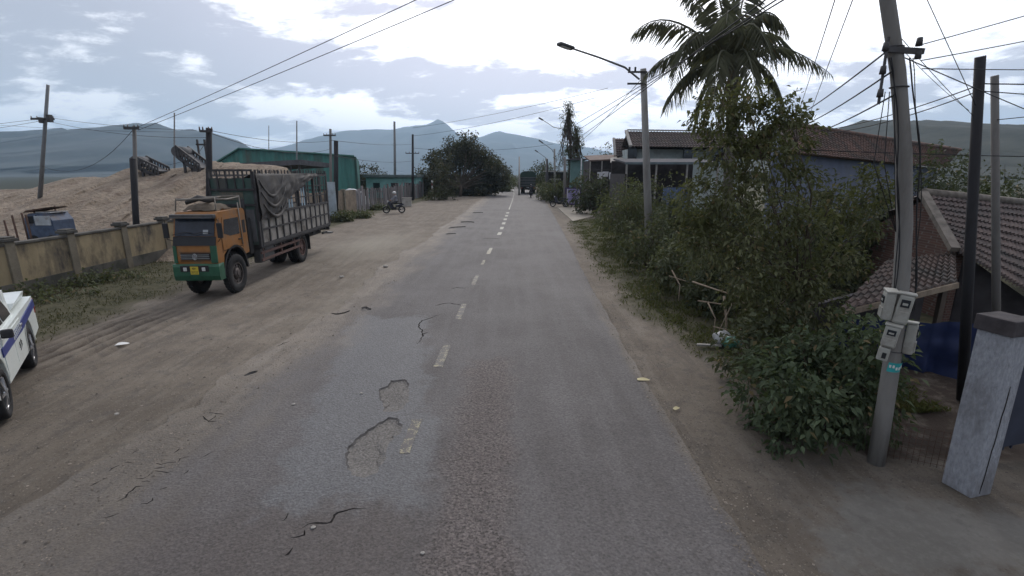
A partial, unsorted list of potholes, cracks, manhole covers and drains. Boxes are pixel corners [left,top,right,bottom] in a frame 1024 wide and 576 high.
crack [91,437,215,518]
pothole [345,417,403,478]
crack [284,508,364,556]
pothole [378,379,410,412]
